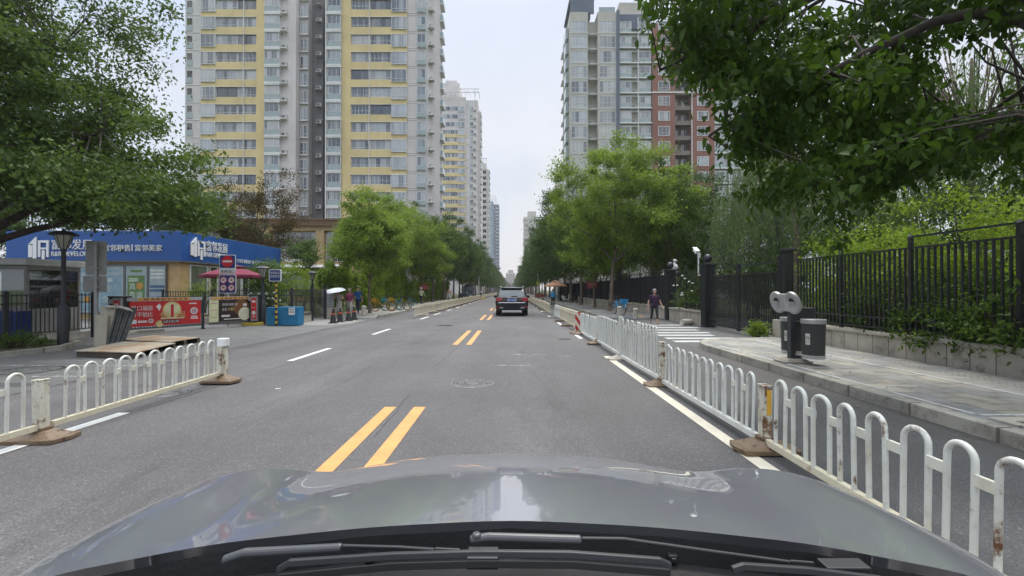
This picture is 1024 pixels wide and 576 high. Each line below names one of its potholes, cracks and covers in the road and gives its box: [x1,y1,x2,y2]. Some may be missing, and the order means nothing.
manhole cover [450,379,494,388]
